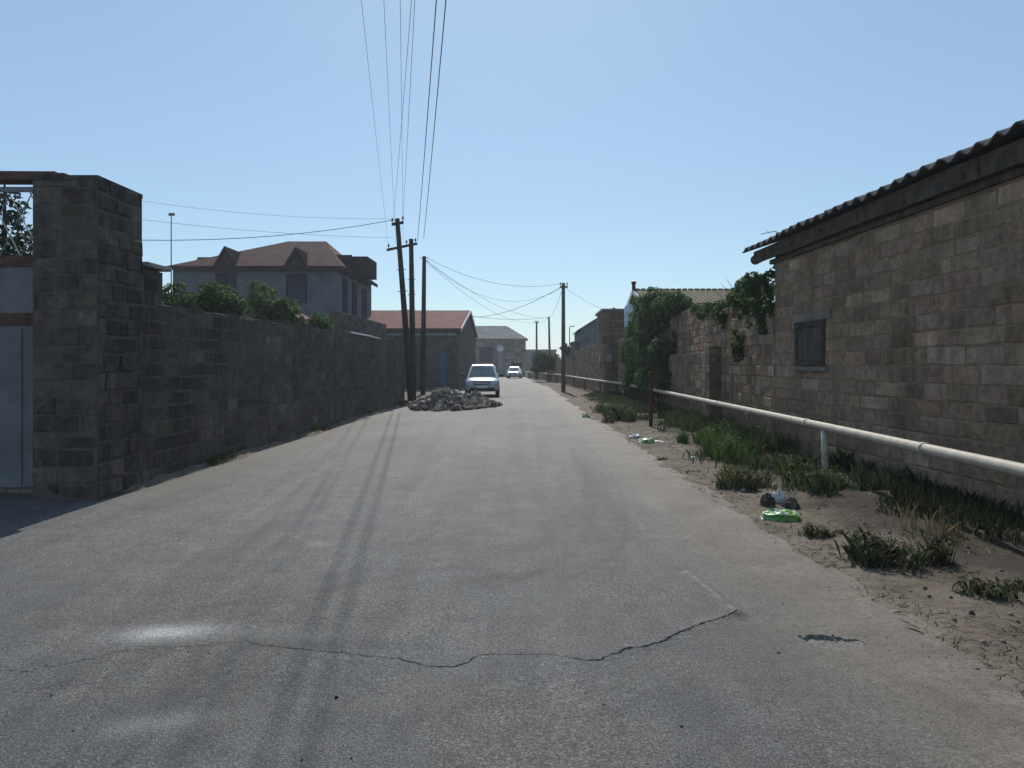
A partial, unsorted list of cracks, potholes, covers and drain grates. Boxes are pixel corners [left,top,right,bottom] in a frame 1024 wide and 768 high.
pothole [798,634,866,650]
crack [1,609,737,672]
